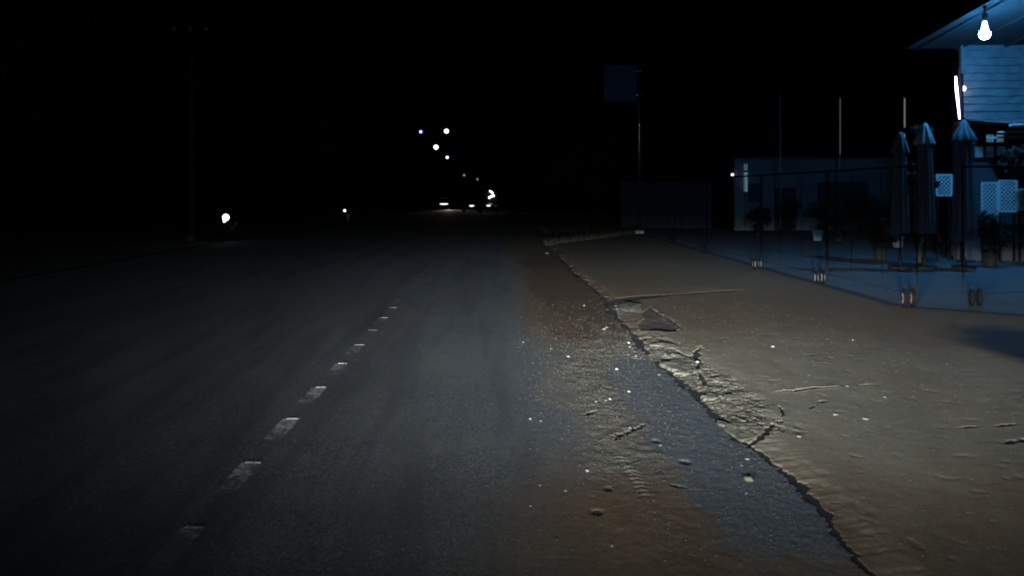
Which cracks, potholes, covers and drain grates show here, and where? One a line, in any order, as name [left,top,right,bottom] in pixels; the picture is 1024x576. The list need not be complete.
crack [578,277,877,576]
crack [996,424,1024,444]
